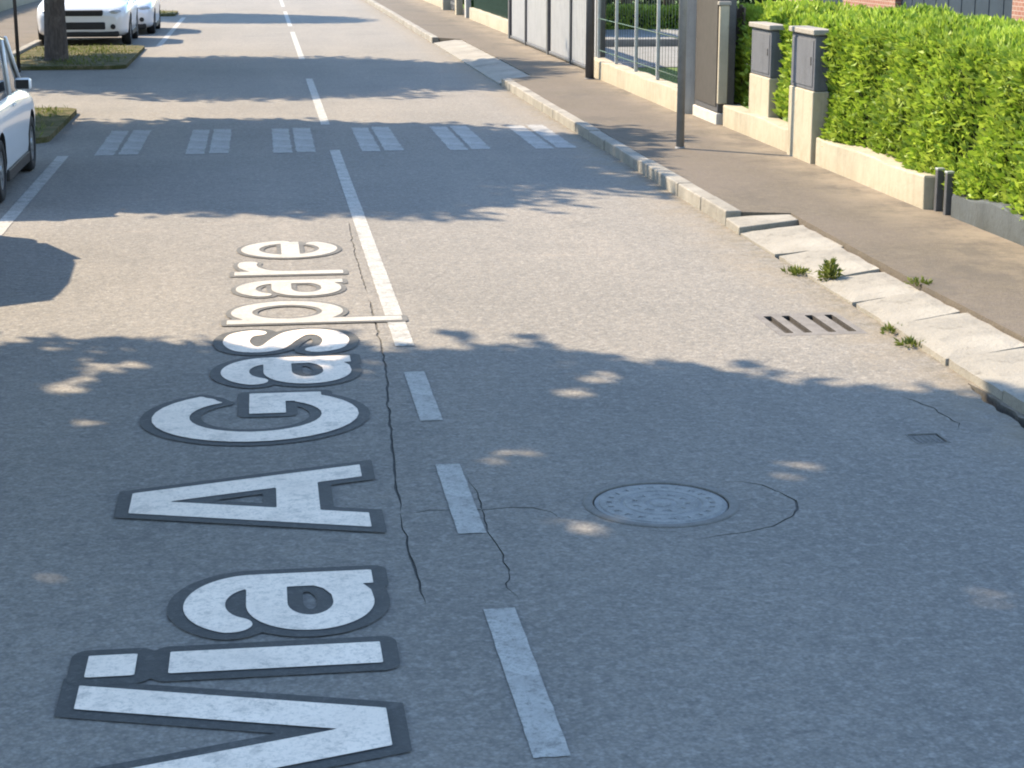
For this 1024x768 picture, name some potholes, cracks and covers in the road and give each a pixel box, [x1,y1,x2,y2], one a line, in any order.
manhole cover [583,480,739,533]
crack [667,482,799,538]
crack [349,224,554,605]
crack [904,384,1024,428]
